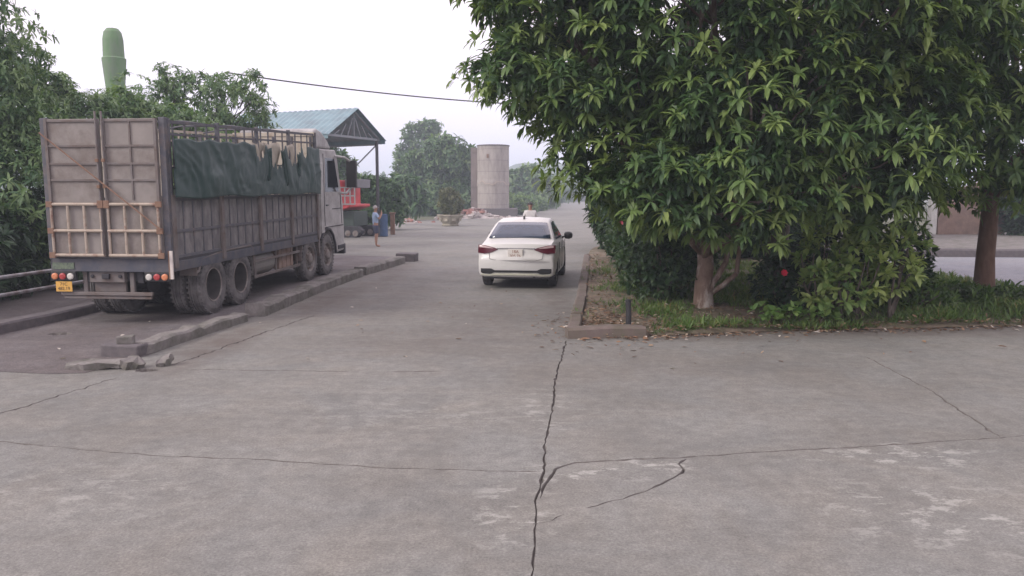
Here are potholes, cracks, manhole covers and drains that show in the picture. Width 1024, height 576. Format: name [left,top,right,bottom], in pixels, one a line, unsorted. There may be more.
crack [531,341,567,576]
